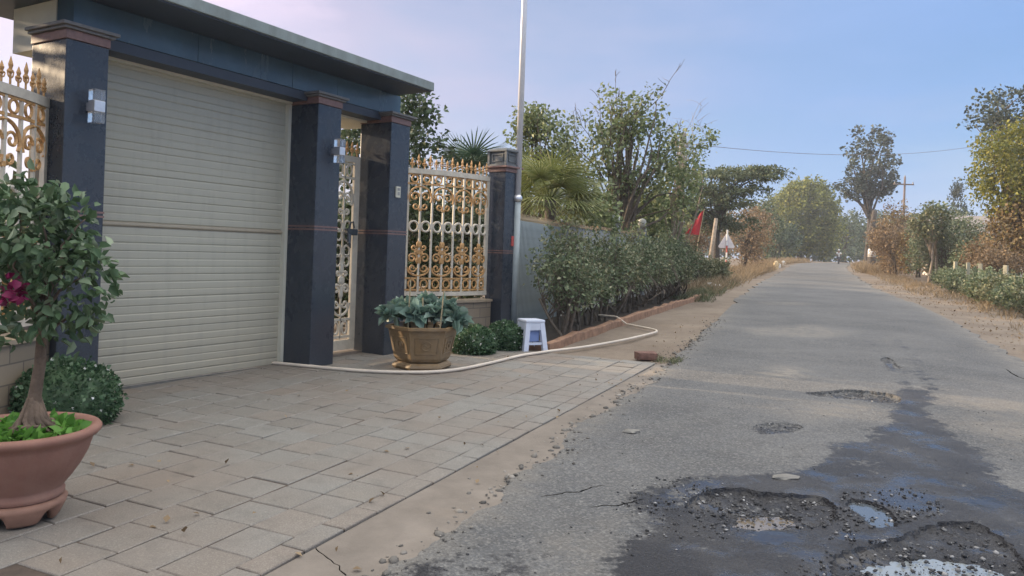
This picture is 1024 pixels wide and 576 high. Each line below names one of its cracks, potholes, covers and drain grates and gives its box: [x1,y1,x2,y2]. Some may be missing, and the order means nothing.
pothole [828,521,1024,576]
pothole [752,423,804,434]
pothole [684,487,837,532]
pothole [845,498,898,527]
pothole [881,357,902,369]
pothole [805,389,901,403]
